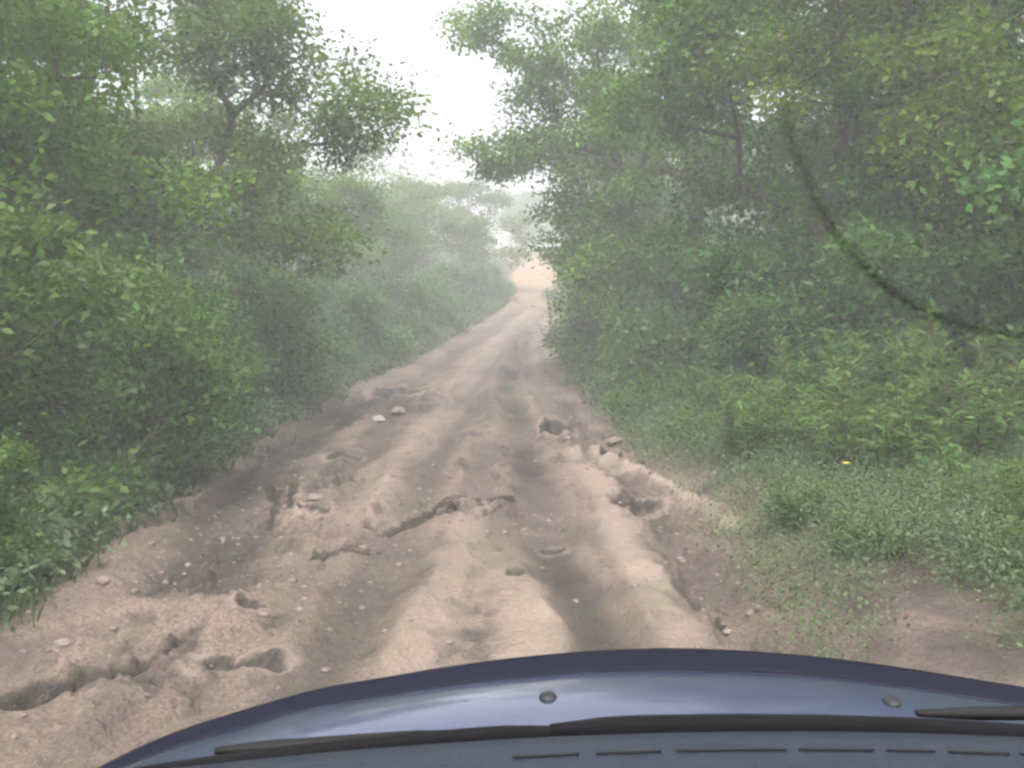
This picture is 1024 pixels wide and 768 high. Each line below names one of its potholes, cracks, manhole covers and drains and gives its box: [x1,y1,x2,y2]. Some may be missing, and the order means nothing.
pothole [236,589,277,610]
pothole [541,546,567,555]
crack [312,493,526,562]
pothole [539,418,575,435]
pothole [202,646,291,674]
pothole [608,488,662,518]
